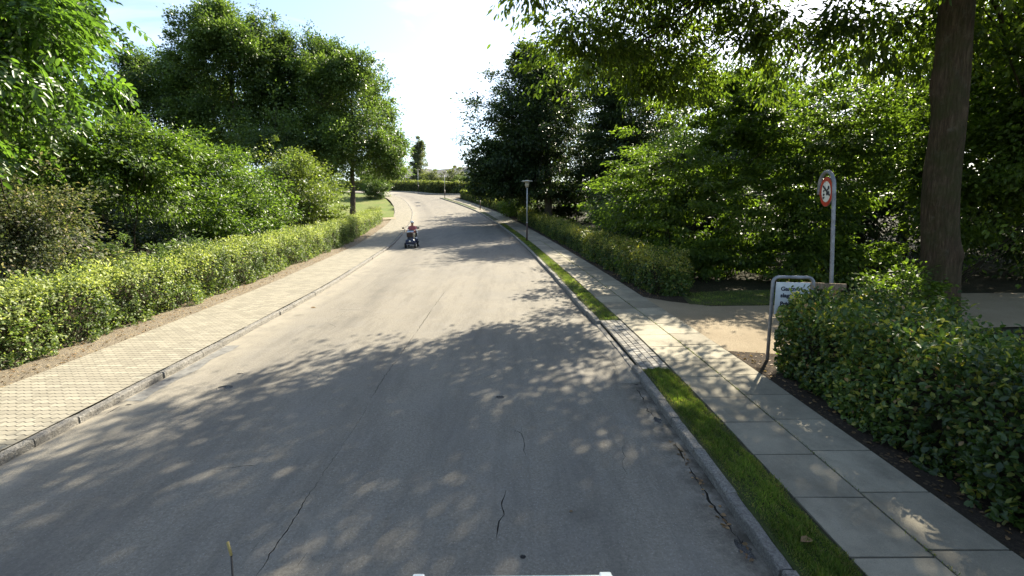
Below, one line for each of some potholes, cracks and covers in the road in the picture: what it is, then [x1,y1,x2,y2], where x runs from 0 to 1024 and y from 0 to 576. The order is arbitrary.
crack [675,443,736,536]
